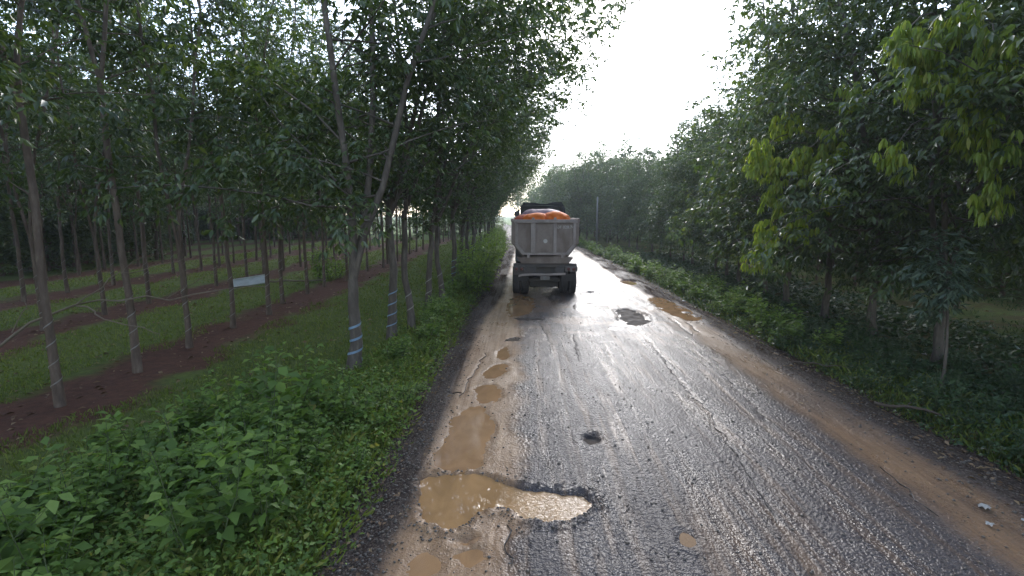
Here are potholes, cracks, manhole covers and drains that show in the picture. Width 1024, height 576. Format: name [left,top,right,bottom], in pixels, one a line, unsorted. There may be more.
pothole [610,307,655,326]
pothole [408,469,604,535]
pothole [668,524,707,553]
pothole [575,429,610,447]
